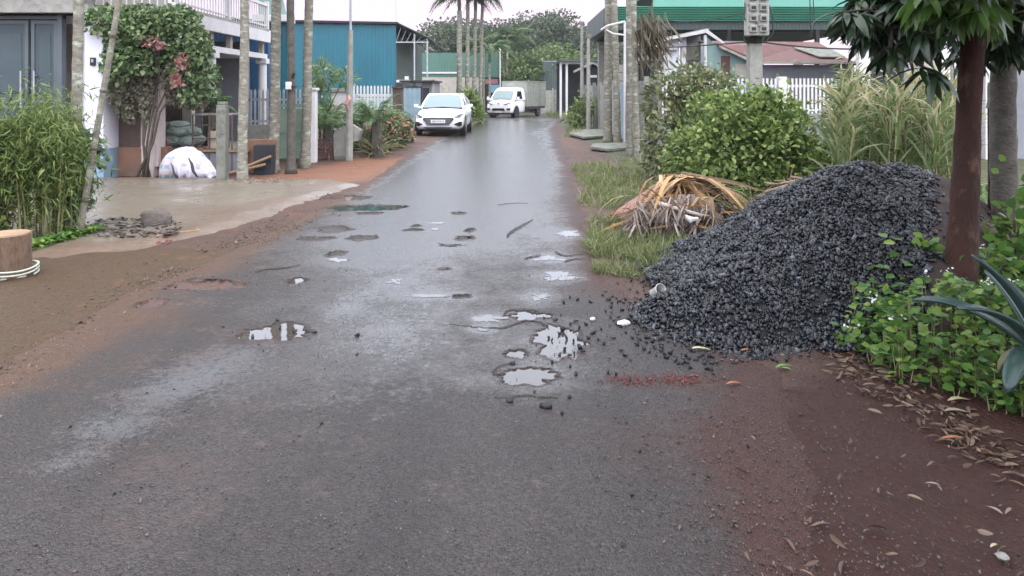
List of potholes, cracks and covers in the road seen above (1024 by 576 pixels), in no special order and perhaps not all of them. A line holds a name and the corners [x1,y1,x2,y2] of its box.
crack [499,203,533,237]
pothole [529,322,598,364]
pothole [317,225,355,233]
pothole [322,250,347,258]
pothole [495,366,565,387]
pothole [164,277,253,291]
pothole [505,310,558,322]
pothole [319,204,407,212]
pothole [502,348,530,360]
pothole [229,320,317,344]
pothole [134,298,171,309]
